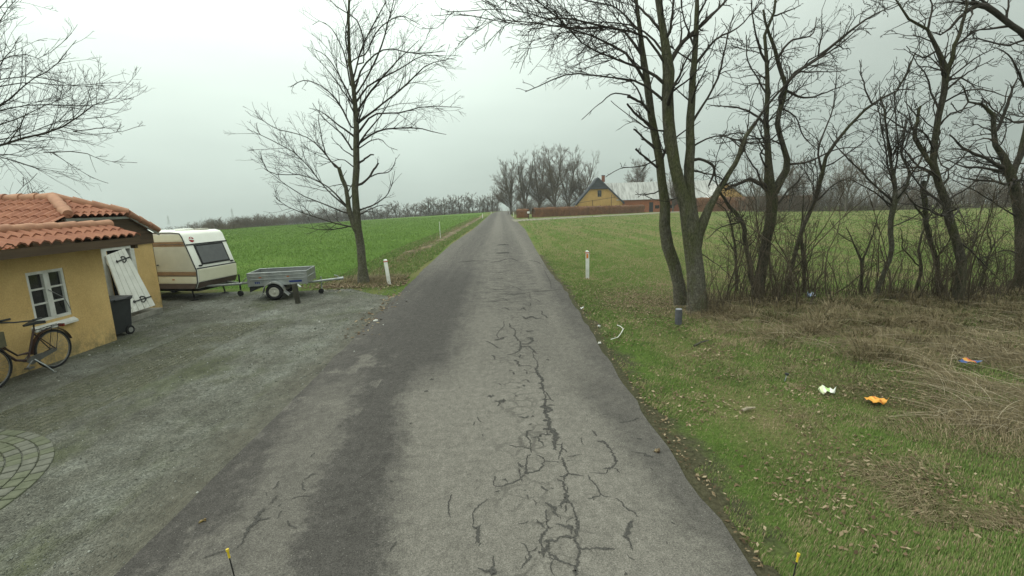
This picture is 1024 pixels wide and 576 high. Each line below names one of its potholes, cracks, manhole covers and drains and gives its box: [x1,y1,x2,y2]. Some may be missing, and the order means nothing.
crack [472,259,653,576]
crack [204,452,315,558]
